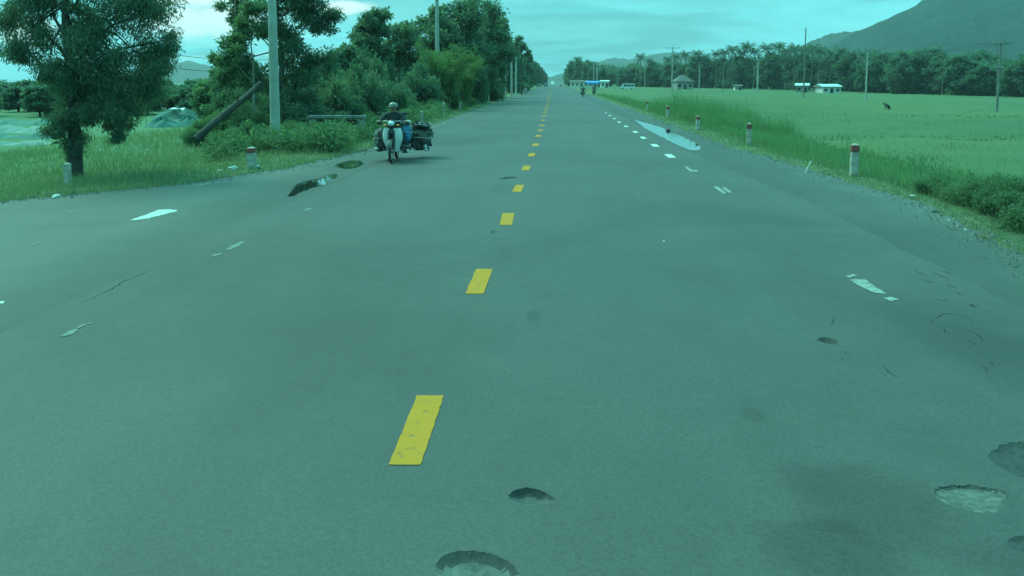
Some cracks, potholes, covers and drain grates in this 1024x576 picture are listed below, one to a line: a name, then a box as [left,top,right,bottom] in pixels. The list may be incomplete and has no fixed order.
pothole [335,160,364,169]
crack [914,269,984,345]
pothole [933,484,1009,513]
pothole [436,550,520,576]
pothole [287,173,339,197]
pothole [1007,536,1024,552]
pothole [817,337,838,345]
pothole [987,441,1024,478]
pothole [508,487,555,505]
